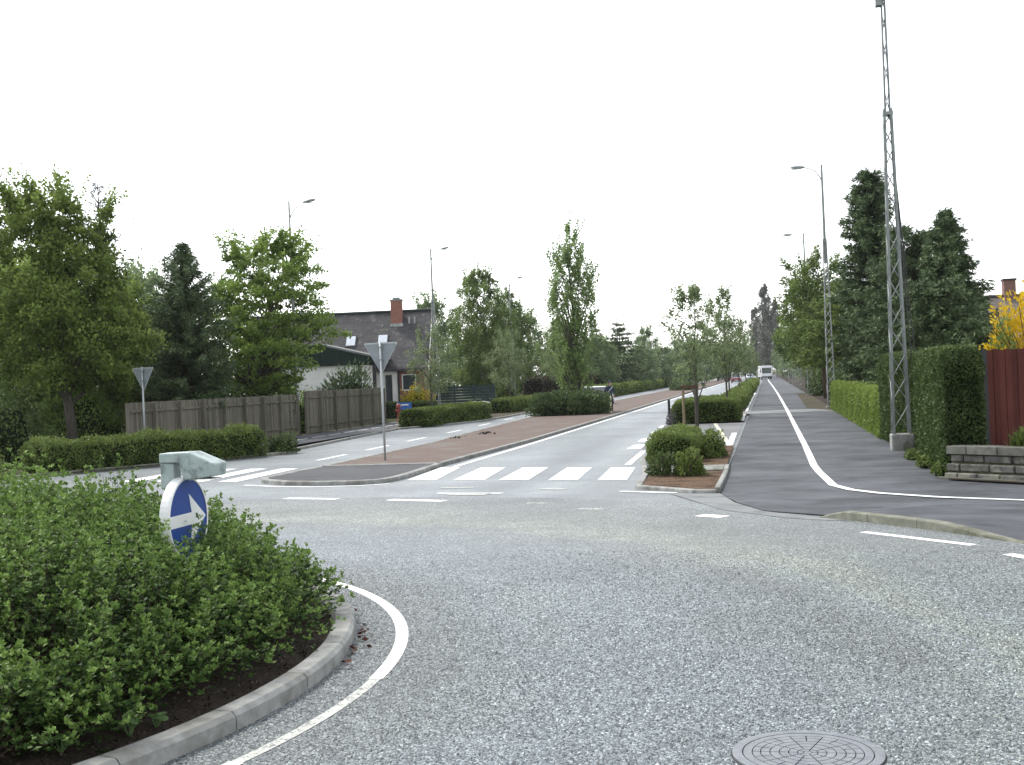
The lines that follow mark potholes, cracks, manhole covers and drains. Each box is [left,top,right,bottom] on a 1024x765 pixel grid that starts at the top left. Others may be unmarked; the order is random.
manhole cover [731,730,887,765]
